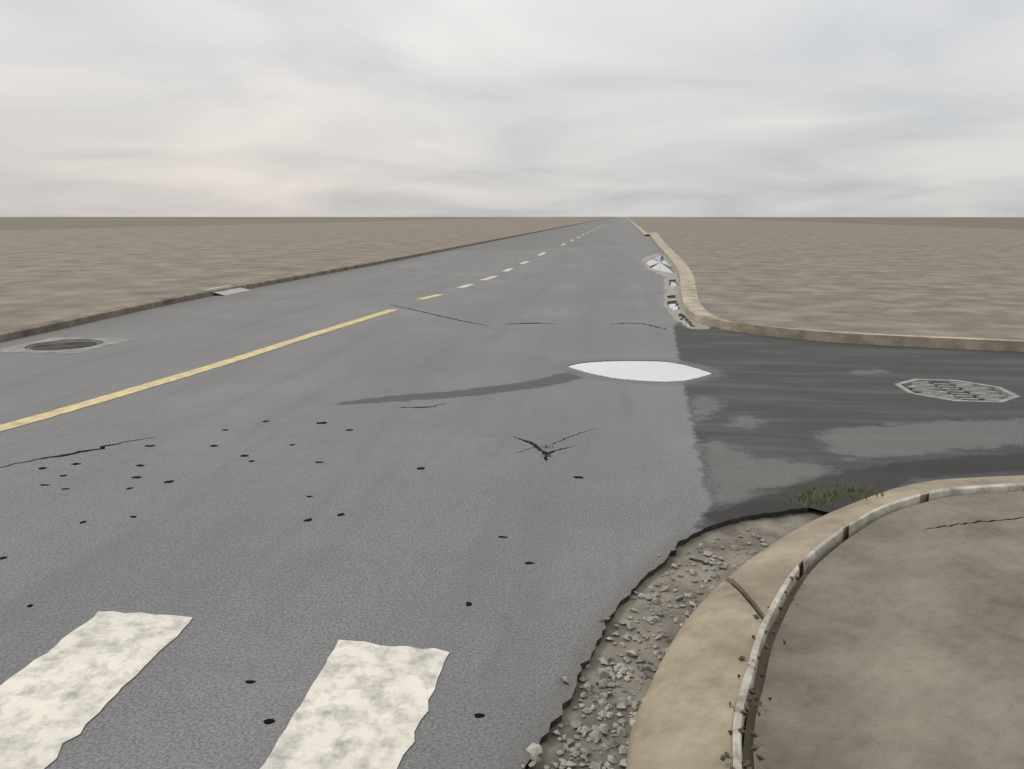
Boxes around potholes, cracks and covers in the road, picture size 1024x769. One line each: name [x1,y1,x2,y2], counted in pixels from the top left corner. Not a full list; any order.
crack [925,517,1024,530]
